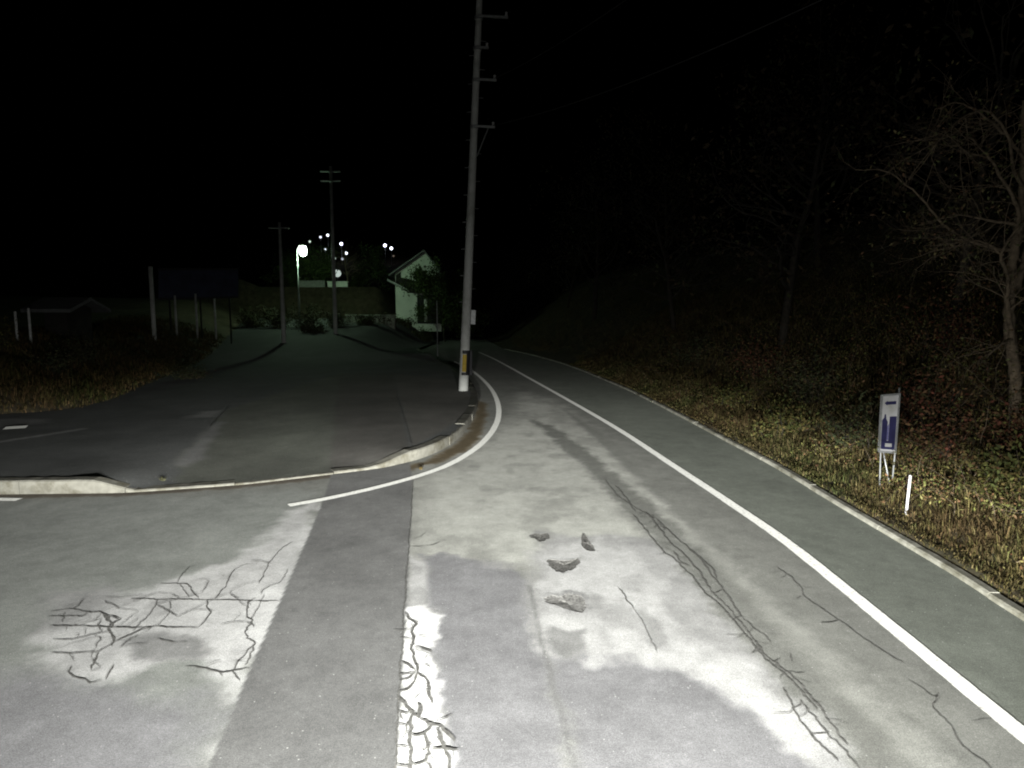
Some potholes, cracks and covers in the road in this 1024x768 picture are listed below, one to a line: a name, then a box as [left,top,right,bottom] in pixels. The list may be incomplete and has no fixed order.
crack [909,680,990,768]
crack [52,542,292,684]
pothole [576,531,597,553]
pothole [525,531,555,543]
crack [394,612,458,768]
pothole [539,591,592,615]
crack [600,481,902,768]
pothole [542,557,585,574]
